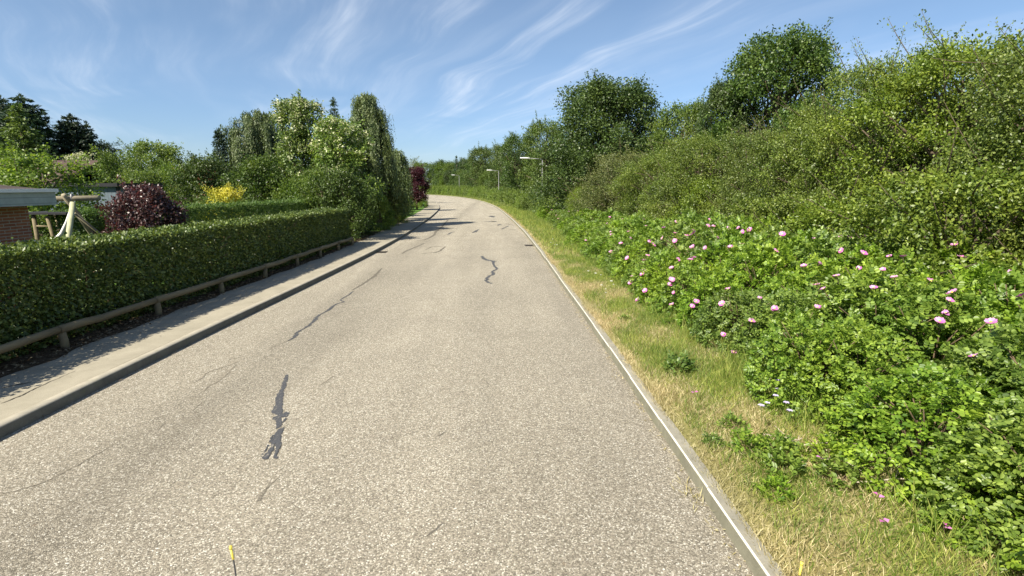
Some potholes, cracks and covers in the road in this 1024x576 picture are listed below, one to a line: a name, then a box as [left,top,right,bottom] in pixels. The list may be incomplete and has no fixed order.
crack [1,441,119,494]
crack [190,356,244,412]
crack [256,477,279,502]
